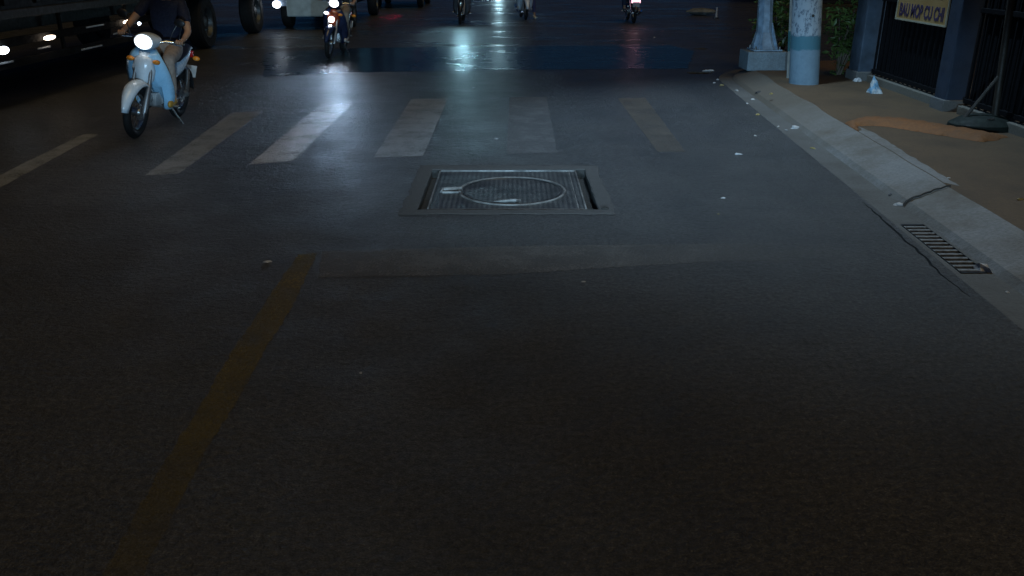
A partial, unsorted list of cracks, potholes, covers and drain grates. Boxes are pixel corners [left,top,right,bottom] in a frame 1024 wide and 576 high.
drain grate [901,224,988,274]
crack [864,185,969,296]
manhole cover [398,165,616,215]
